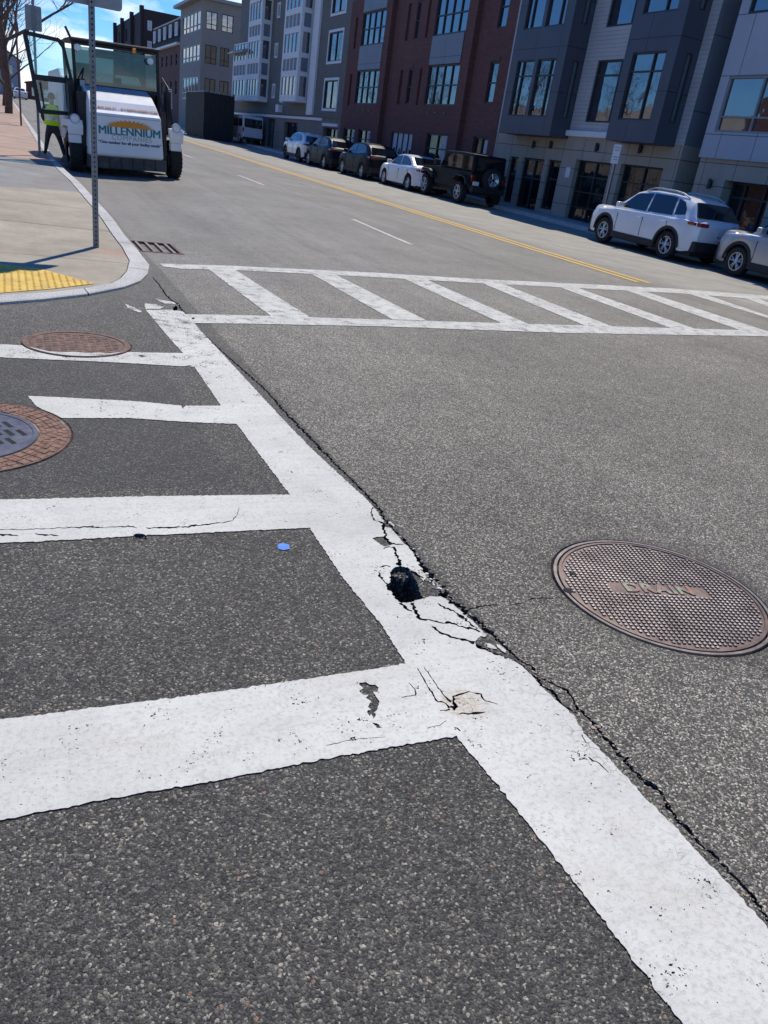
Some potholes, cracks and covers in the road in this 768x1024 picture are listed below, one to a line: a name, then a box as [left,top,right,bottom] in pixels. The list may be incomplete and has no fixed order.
drain grate [129,240,184,255]
manhole cover [0,402,74,473]
manhole cover [20,331,132,358]
manhole cover [550,540,768,657]
pothole [387,566,425,609]
crack [200,330,768,923]
crack [1,509,239,536]
